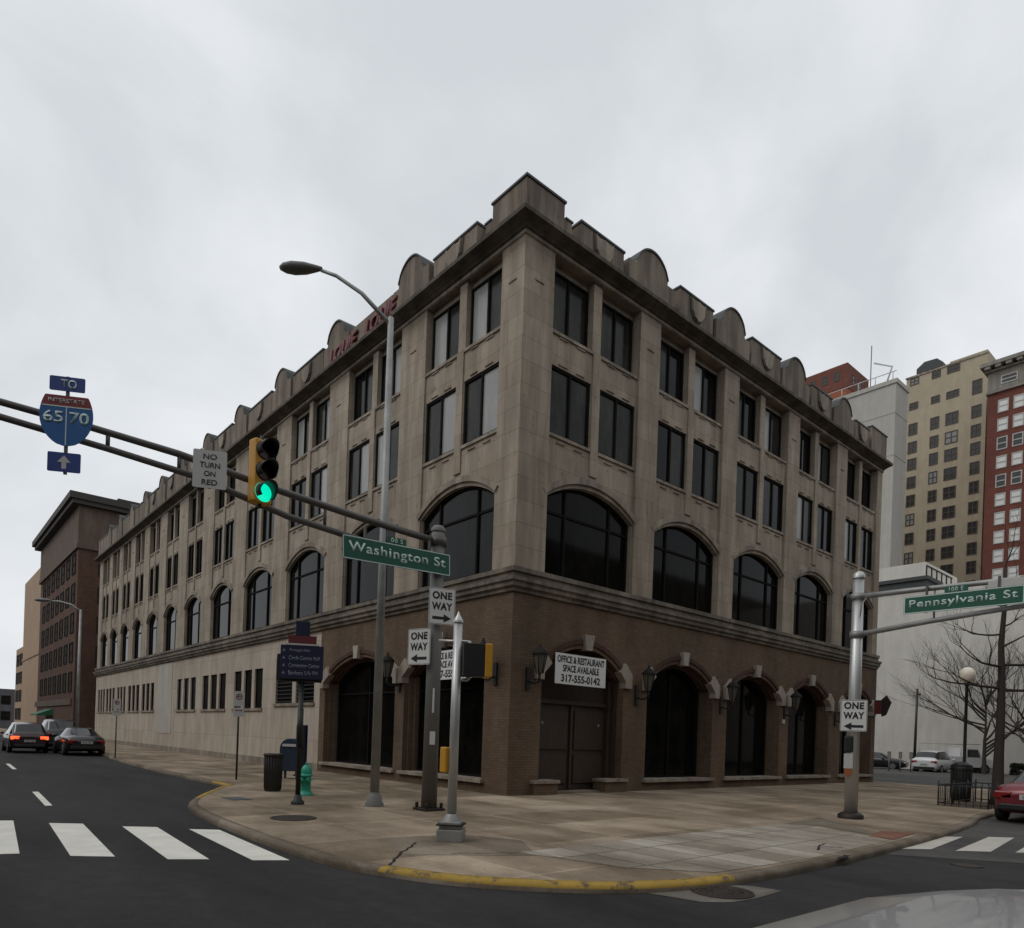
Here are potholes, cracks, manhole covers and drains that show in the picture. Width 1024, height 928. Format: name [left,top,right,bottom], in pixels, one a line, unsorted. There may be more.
manhole cover [691,885,755,899]
